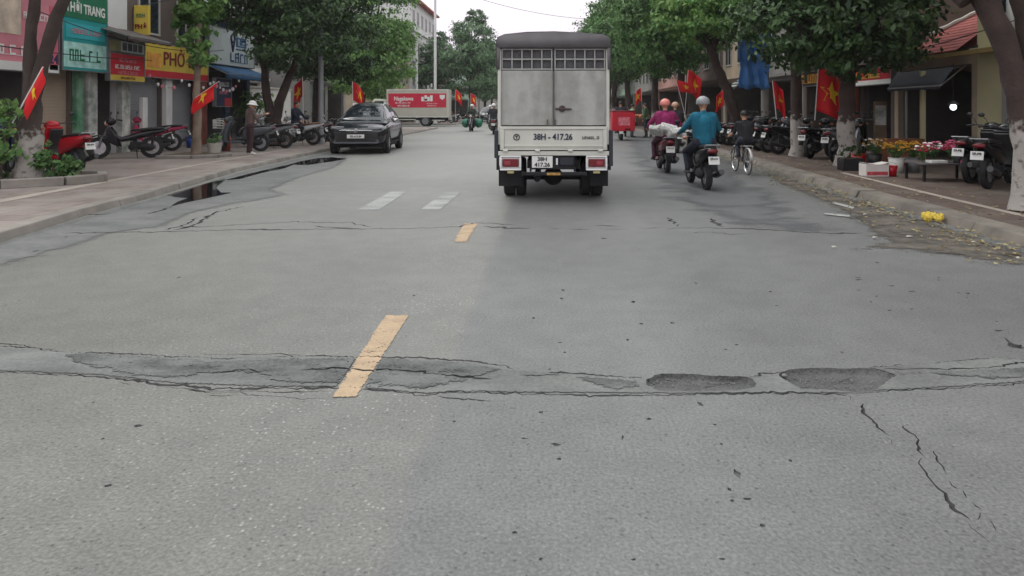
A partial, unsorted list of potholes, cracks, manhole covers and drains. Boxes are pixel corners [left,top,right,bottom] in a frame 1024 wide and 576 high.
pothole [646,373,756,393]
pothole [779,368,895,393]
crack [656,218,863,235]
crack [0,343,1020,543]
crack [80,206,529,234]
